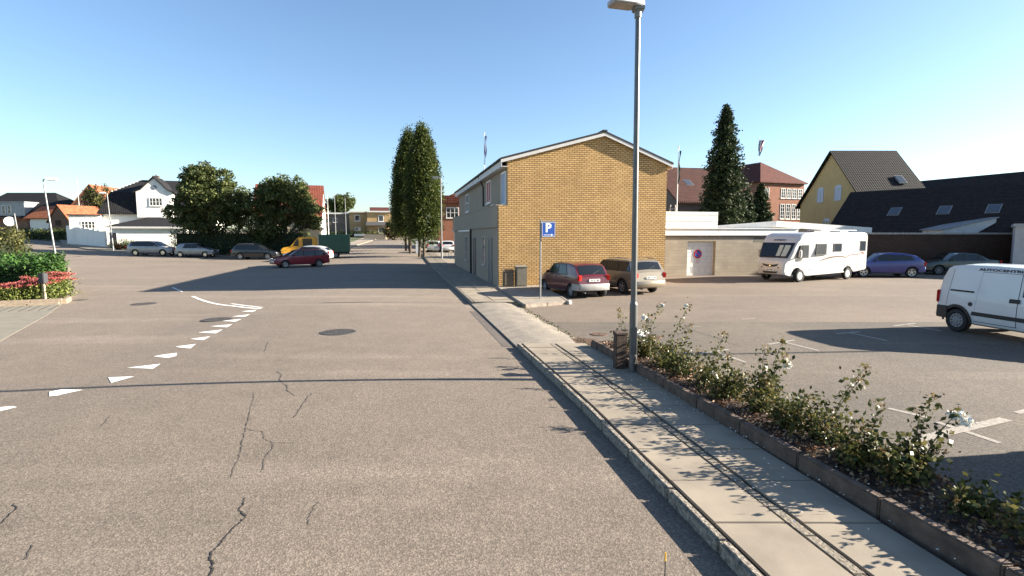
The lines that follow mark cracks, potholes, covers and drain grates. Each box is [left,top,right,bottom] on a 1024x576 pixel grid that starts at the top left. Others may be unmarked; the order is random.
crack [209,497,247,576]
crack [231,398,289,477]
